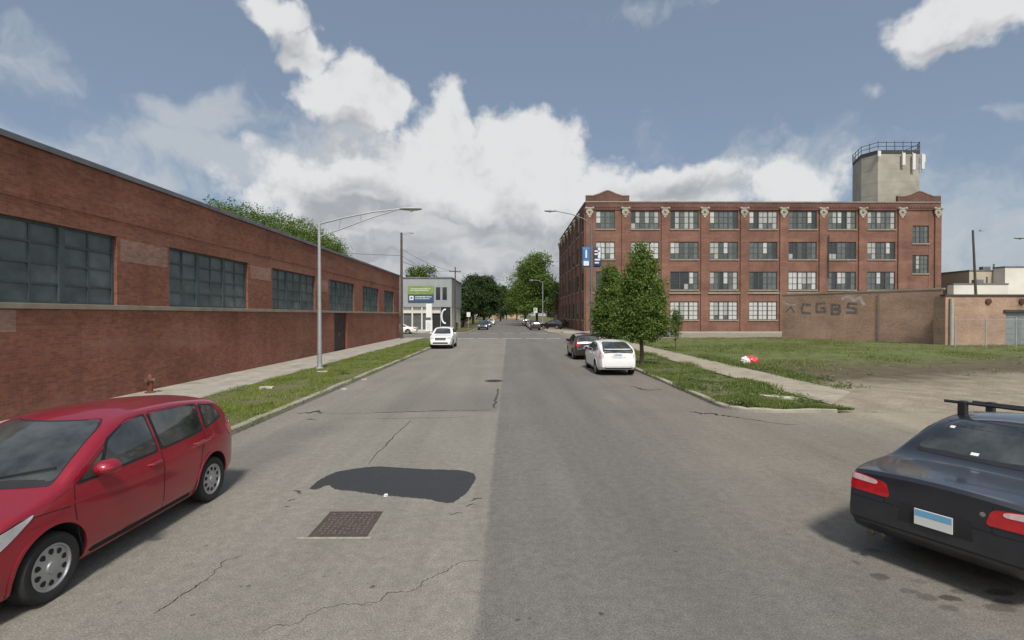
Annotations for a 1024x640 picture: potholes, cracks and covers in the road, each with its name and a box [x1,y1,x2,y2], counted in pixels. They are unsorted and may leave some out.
crack [369,416,466,463]
crack [263,560,478,631]
crack [695,412,797,425]
manhole cover [295,511,383,539]
crack [153,555,243,614]
